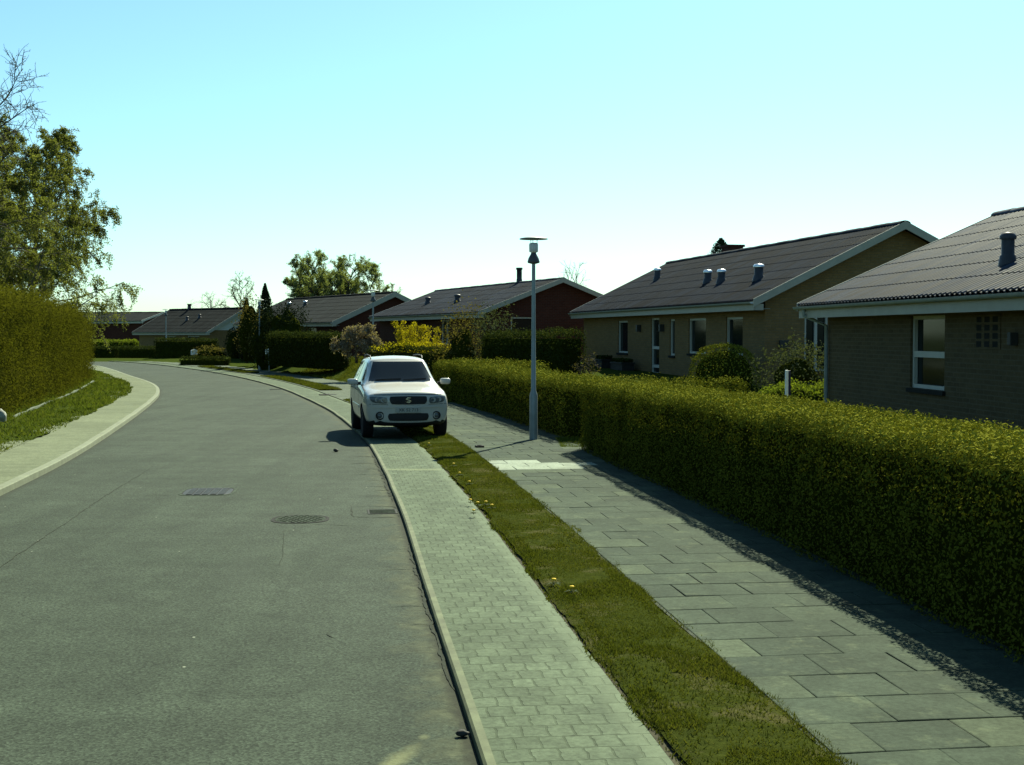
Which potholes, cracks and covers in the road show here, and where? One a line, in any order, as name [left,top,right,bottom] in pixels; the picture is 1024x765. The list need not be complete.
crack [2,469,149,566]
manhole cover [271,515,329,524]
crack [389,544,455,690]
